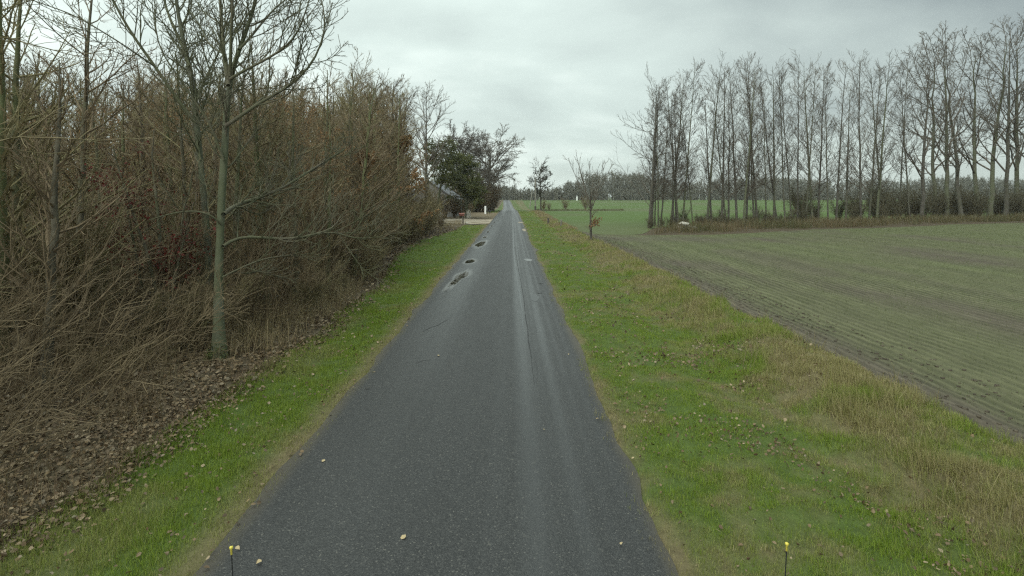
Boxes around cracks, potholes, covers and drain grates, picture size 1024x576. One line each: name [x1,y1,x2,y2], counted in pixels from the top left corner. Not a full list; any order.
pothole [448,271,468,287]
crack [515,248,543,378]
